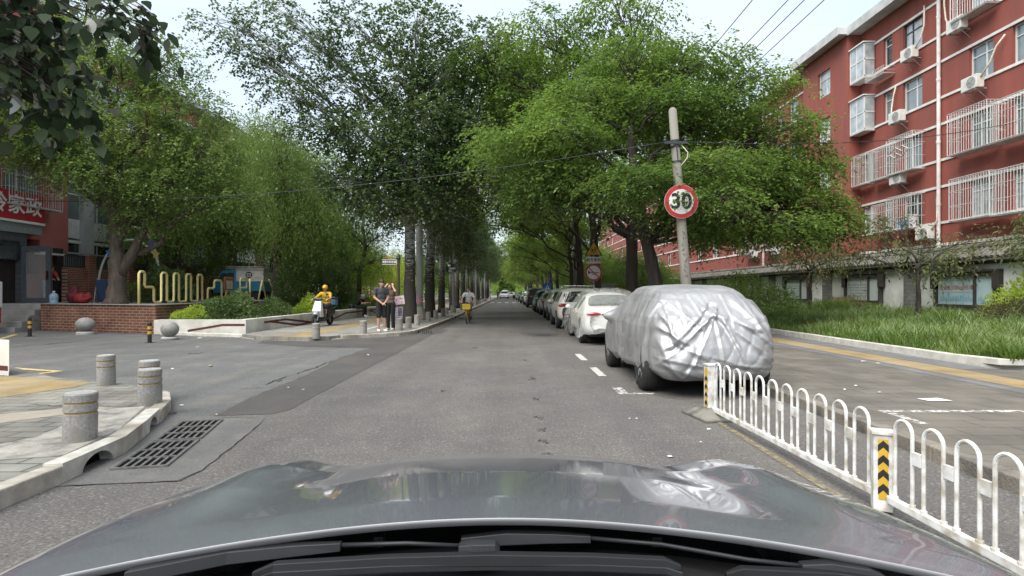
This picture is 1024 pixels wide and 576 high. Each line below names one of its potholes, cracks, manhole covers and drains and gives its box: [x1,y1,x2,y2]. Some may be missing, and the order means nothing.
drain grate [153,419,223,441]
drain grate [109,439,200,470]
